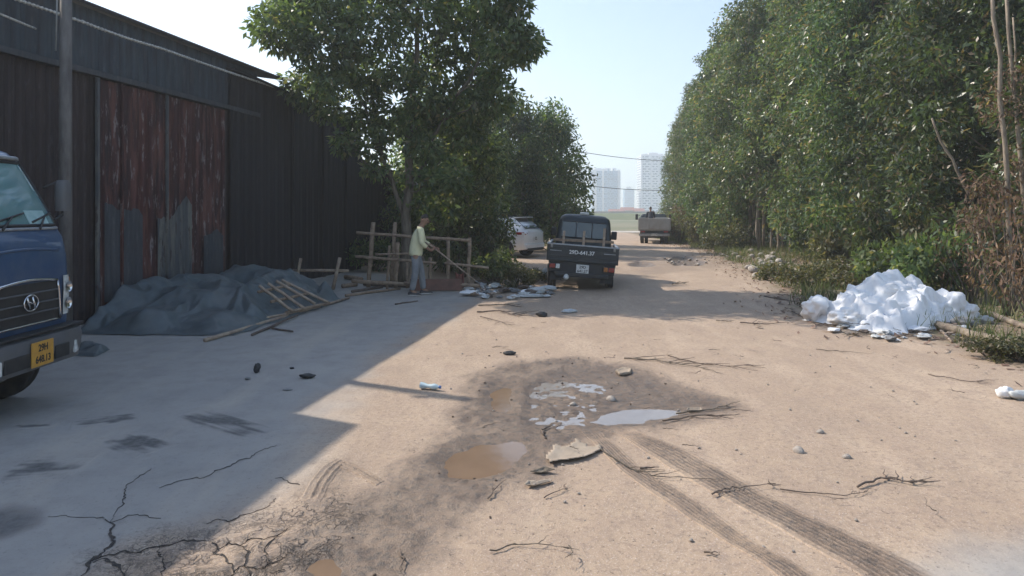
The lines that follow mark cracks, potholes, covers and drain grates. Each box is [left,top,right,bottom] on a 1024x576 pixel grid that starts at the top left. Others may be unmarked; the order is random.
pothole [419,431,546,487]
pothole [514,364,739,438]
crack [48,446,300,576]
